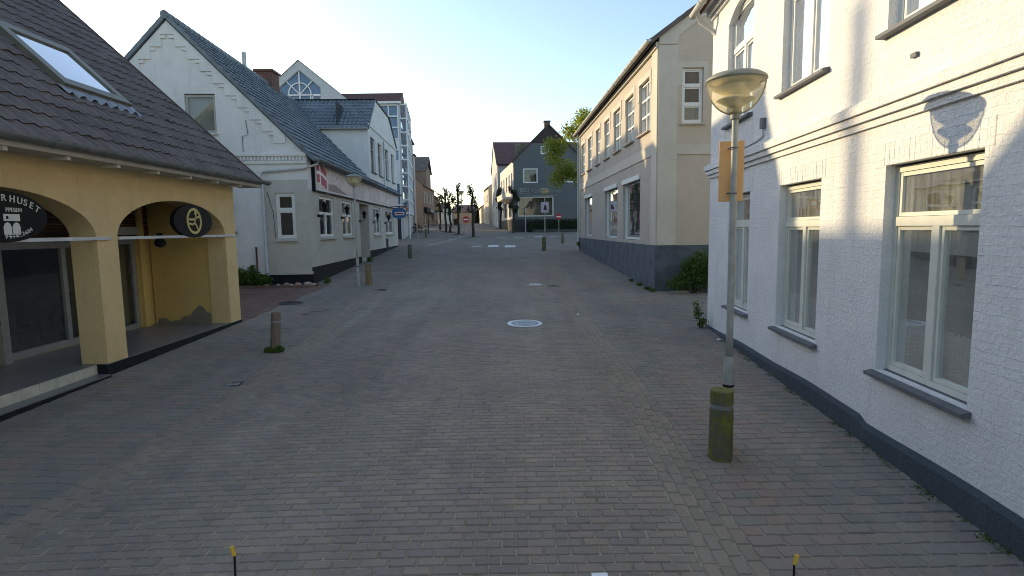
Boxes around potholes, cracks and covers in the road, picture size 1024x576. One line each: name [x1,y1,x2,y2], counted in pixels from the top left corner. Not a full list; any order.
manhole cover [507,320,542,328]
